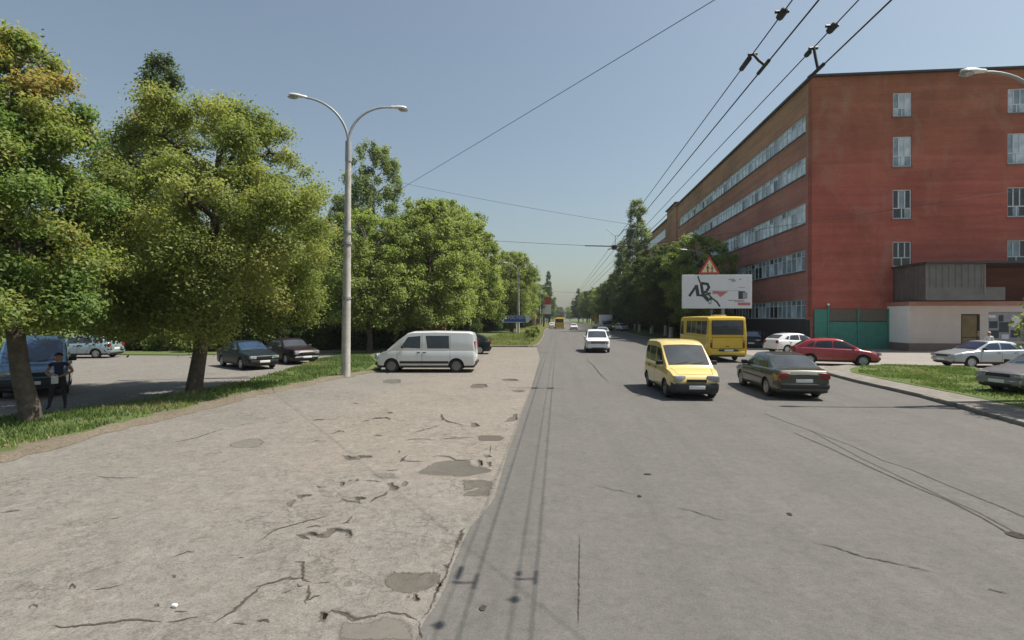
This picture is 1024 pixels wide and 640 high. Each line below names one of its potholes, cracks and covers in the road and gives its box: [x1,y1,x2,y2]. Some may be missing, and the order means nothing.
crack [312,403,471,523]
crack [55,610,196,628]
crack [456,528,465,547]
crack [808,541,934,572]
crack [215,561,423,637]
pothole [302,527,354,538]
